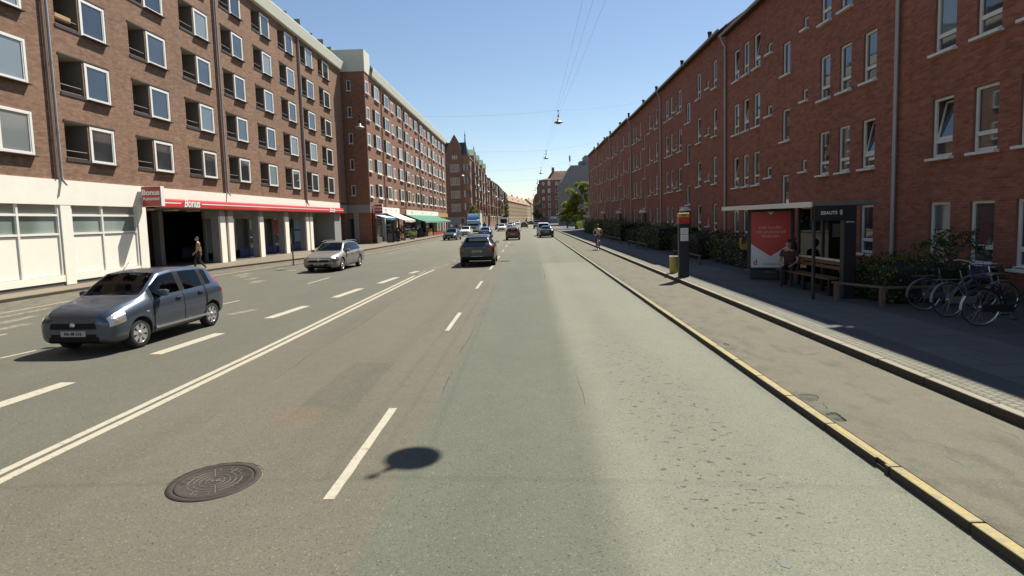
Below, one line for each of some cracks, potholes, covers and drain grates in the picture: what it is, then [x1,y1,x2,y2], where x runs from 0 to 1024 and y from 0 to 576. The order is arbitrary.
pothole [825,412,847,422]
pothole [798,394,819,402]
manhole cover [163,462,264,503]
